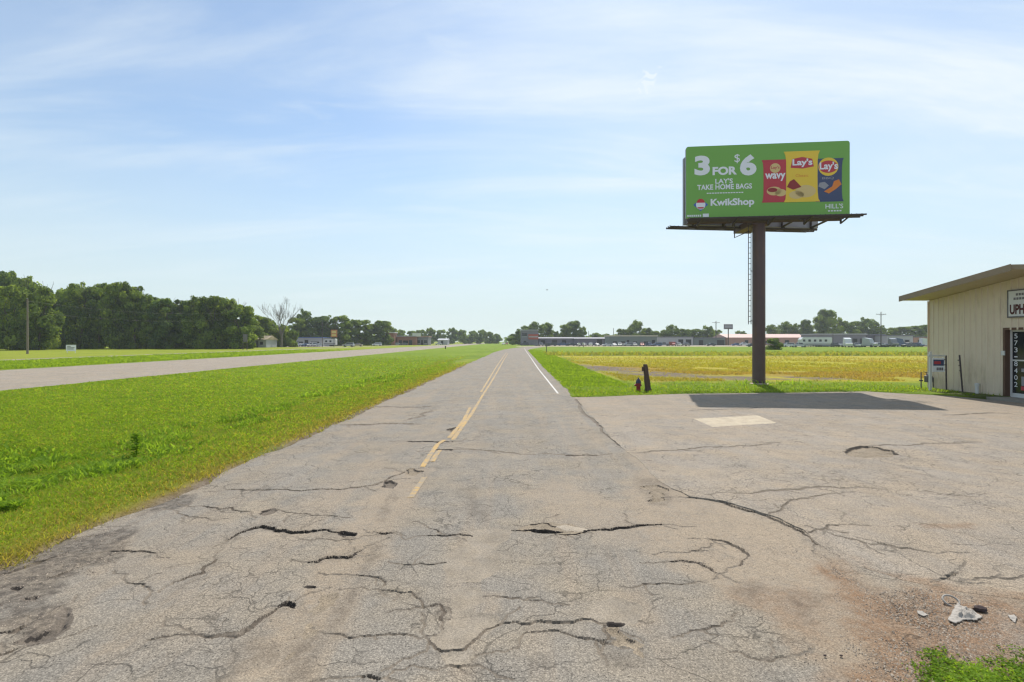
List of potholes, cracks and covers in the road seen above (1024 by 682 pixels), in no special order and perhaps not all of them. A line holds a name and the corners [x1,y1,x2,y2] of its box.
crack [0,406,780,682]
pothole [842,445,900,458]
crack [664,486,1024,586]
pothole [640,485,670,503]
